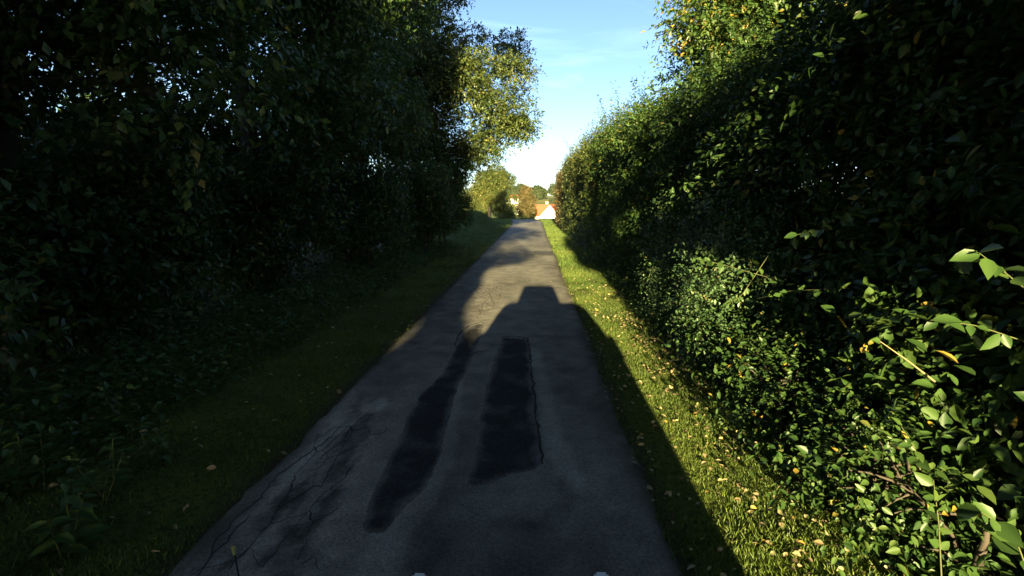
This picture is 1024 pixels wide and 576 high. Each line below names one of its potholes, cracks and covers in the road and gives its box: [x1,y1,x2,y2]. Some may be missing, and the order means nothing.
crack [191,414,387,576]
crack [454,282,515,358]
